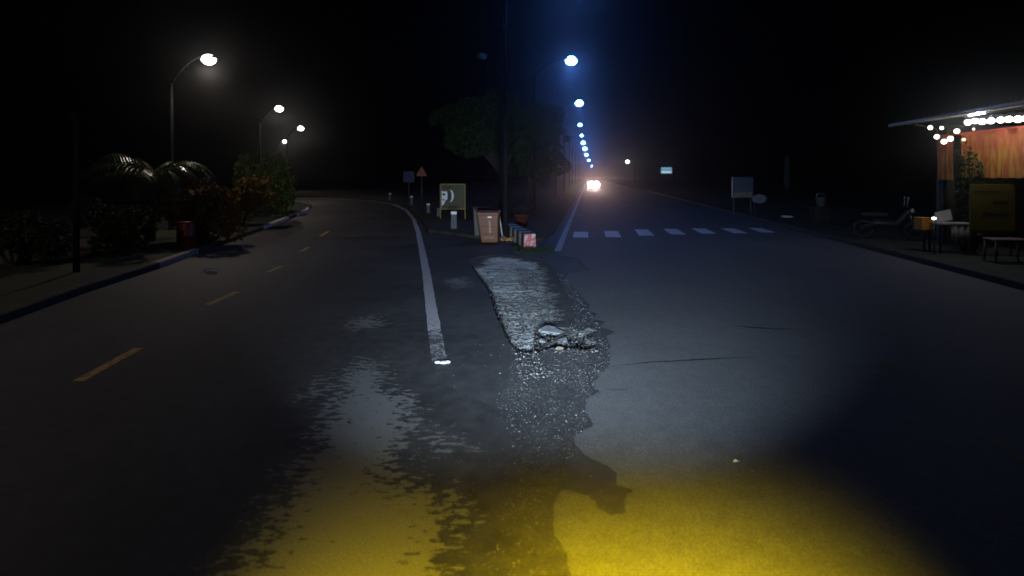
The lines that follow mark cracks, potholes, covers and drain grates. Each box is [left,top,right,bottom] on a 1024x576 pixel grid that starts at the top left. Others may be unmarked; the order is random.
pothole [468,255,577,353]
pothole [533,326,596,352]
crack [573,357,747,366]
